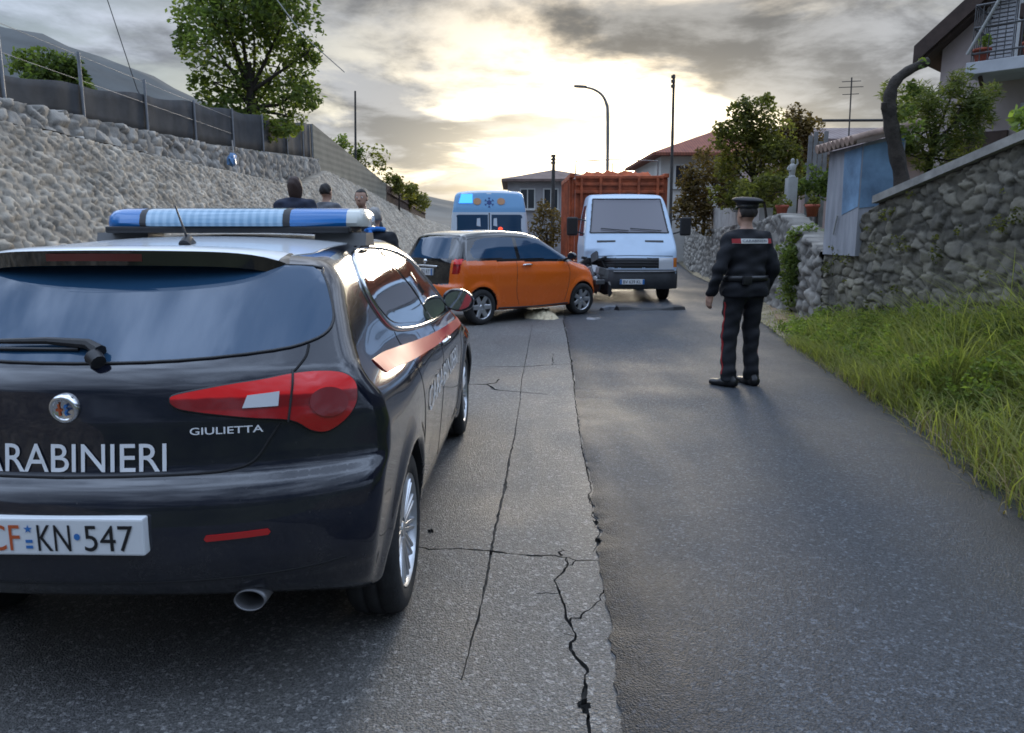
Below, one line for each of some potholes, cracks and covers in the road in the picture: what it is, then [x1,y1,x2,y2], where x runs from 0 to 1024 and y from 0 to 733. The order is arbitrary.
crack [419,320,604,733]
